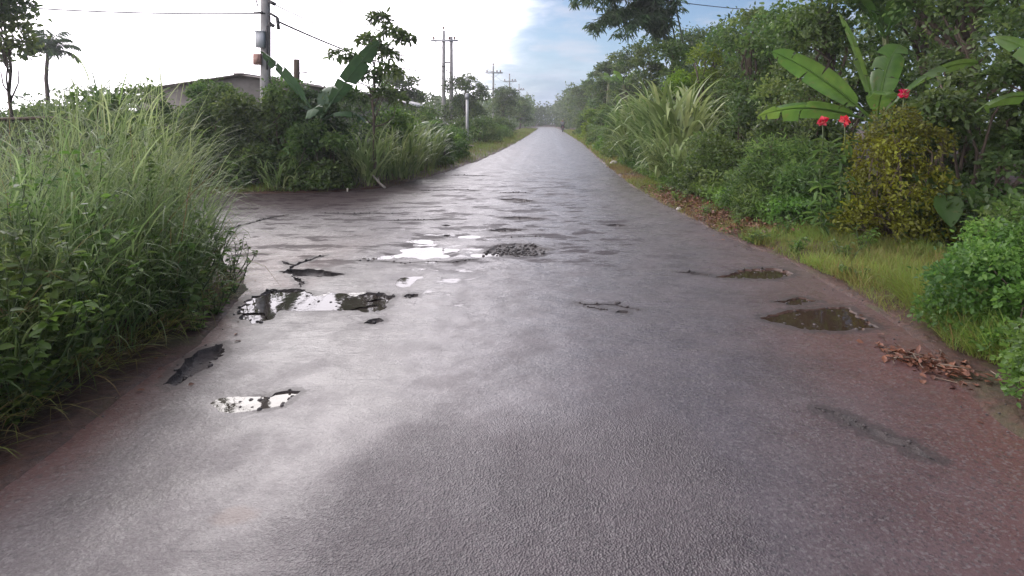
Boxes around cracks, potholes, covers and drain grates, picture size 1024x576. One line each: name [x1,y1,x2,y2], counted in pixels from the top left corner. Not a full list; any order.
crack [575,302,639,310]
pothole [760,307,879,331]
pothole [718,267,793,279]
pothole [774,297,819,305]
pothole [330,292,395,313]
pothole [164,344,225,386]
pothole [482,243,550,257]
crack [282,255,326,287]
pothole [239,389,300,411]
pothole [236,289,320,324]
